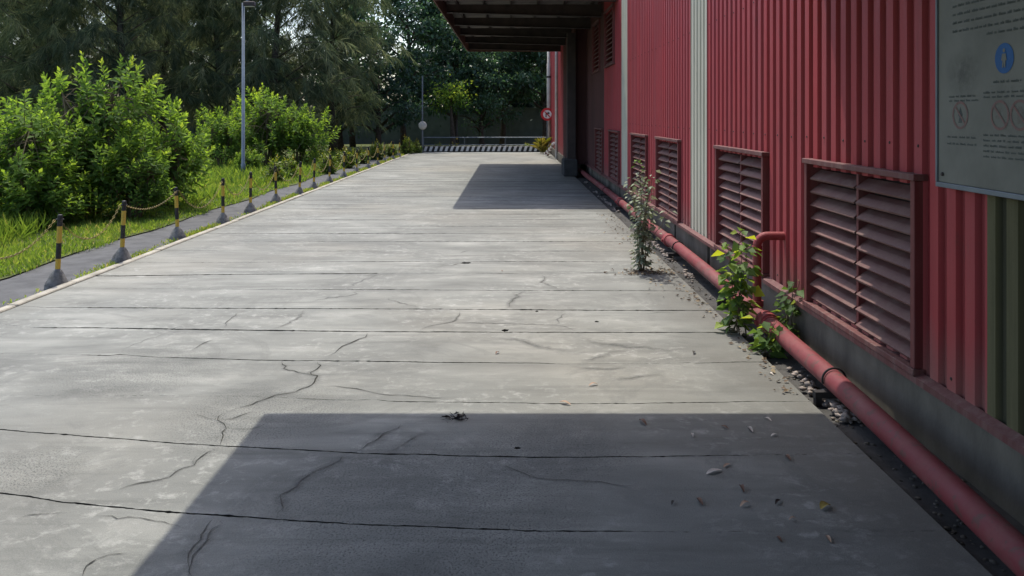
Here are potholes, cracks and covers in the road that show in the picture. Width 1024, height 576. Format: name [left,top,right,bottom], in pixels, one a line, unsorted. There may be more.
crack [498,463,632,486]
crack [25,512,223,575]
crack [123,362,431,488]
crack [421,278,670,380]
crack [277,424,423,514]
